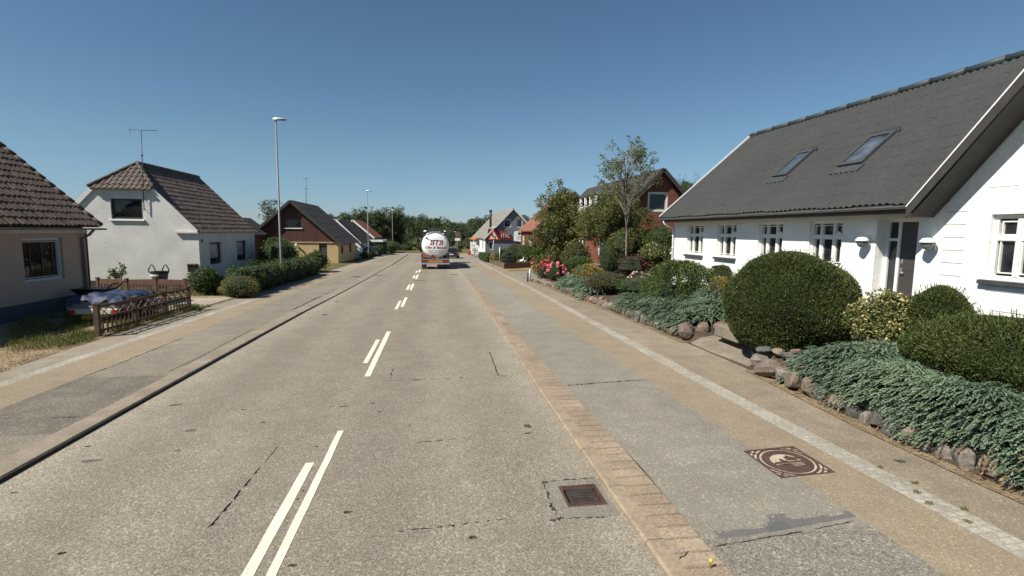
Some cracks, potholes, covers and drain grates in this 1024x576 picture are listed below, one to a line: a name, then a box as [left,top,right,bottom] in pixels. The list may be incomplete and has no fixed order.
manhole cover [744,446,836,478]
drain grate [558,484,608,507]
crack [397,519,503,532]
crack [208,447,278,527]
